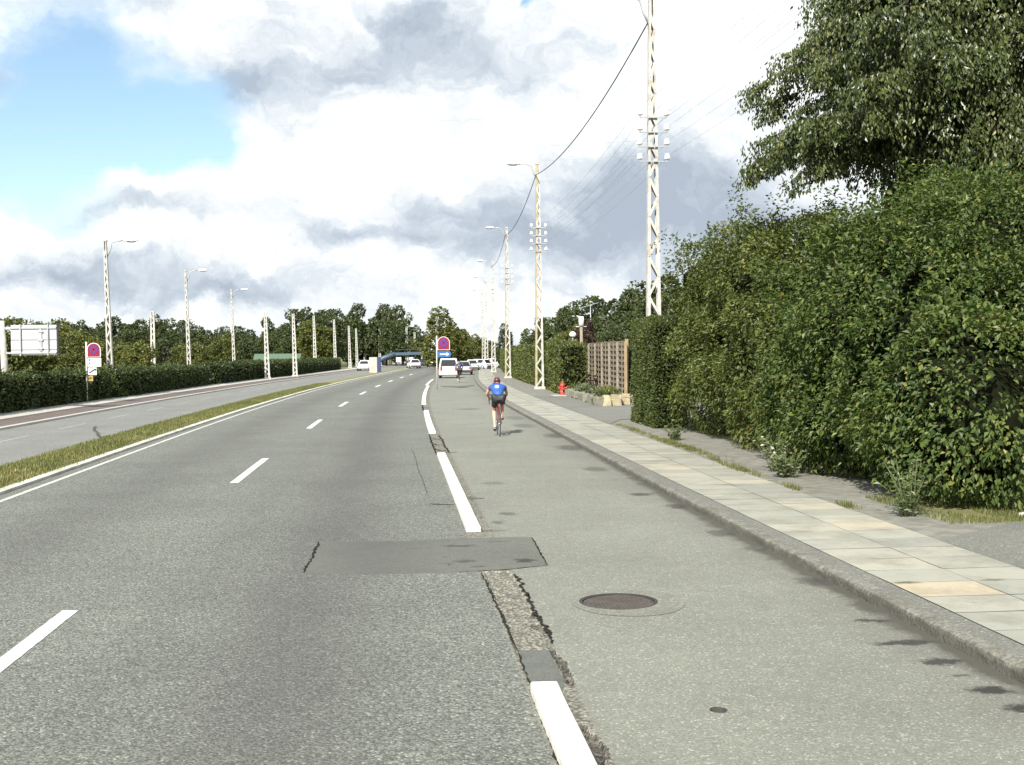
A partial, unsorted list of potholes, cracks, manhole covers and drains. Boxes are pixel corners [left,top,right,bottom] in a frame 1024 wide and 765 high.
crack [412,434,450,493]
crack [462,538,559,764]
manhole cover [571,589,686,616]
crack [304,542,320,572]
